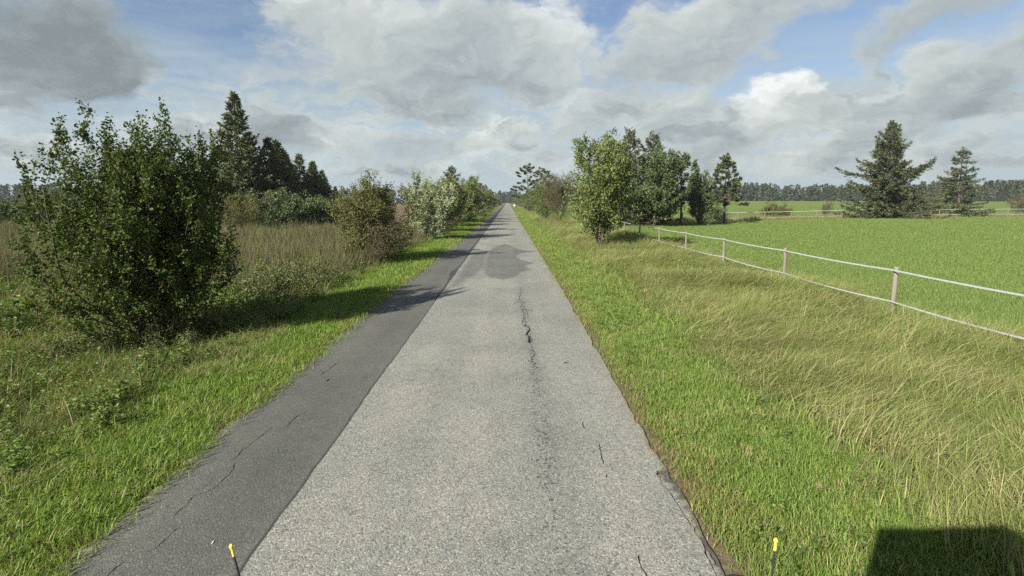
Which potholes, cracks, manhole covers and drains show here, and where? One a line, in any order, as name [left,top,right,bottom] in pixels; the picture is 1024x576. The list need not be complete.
crack [107,414,301,576]
crack [513,289,540,369]
